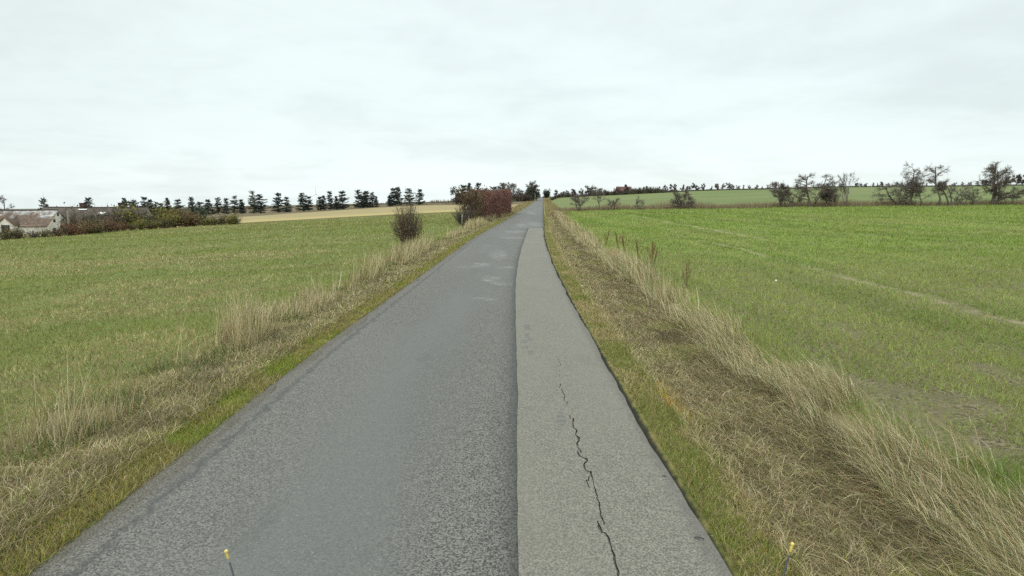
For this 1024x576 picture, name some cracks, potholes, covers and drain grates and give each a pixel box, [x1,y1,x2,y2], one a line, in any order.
crack [558,359,620,576]
